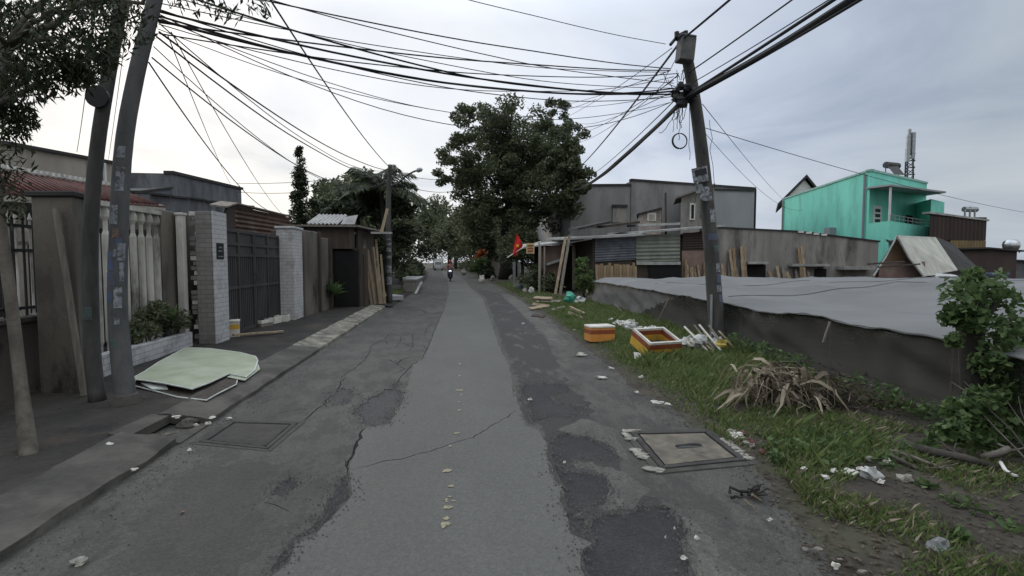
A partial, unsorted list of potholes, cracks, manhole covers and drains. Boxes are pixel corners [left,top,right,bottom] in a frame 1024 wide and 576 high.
crack [352,410,516,470]
crack [277,305,441,421]
manhole cover [189,420,305,452]
manhole cover [621,429,759,475]
drain grate [108,414,209,444]
